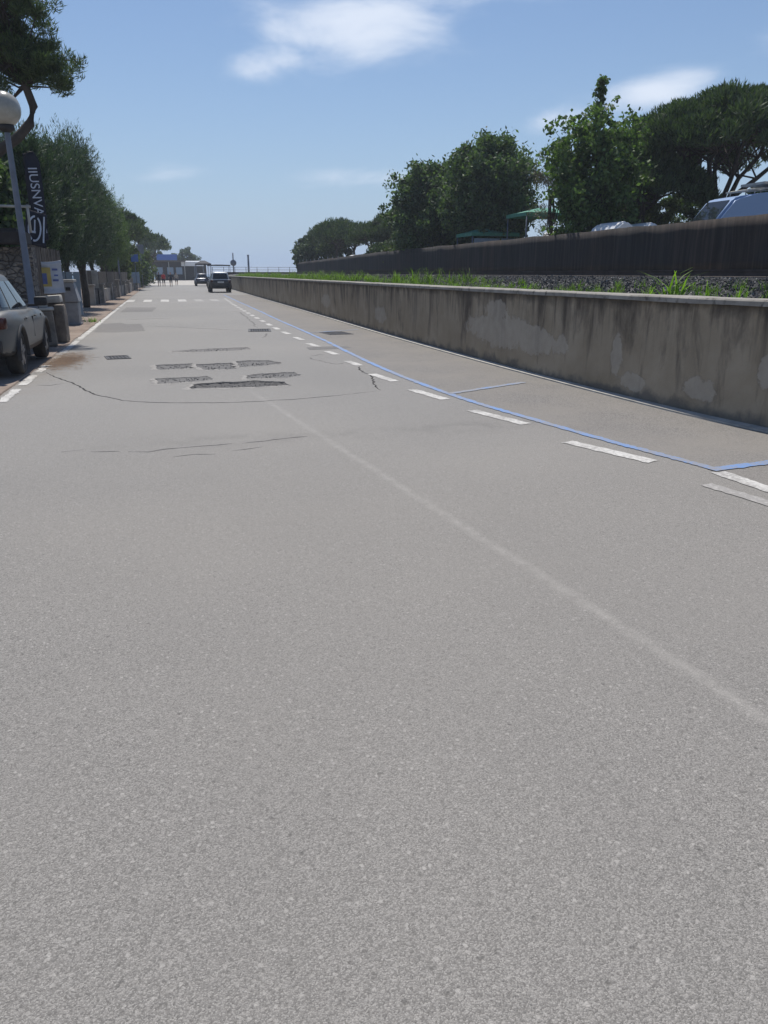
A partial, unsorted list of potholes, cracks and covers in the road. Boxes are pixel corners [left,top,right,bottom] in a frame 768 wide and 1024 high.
crack [49,355,380,403]
crack [65,436,307,457]
